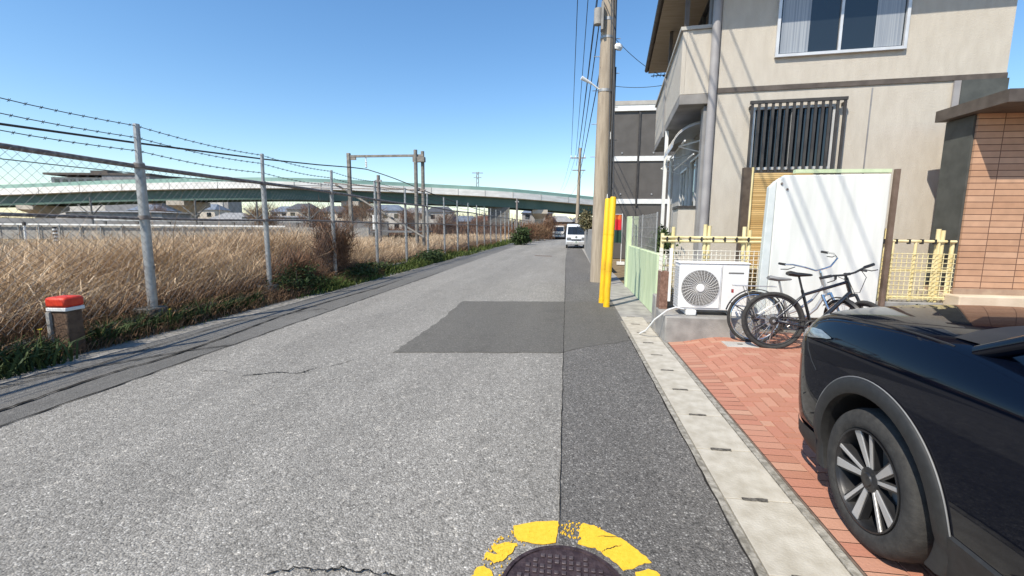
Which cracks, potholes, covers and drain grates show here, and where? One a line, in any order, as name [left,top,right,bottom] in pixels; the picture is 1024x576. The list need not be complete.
crack [263,565,396,576]
crack [0,279,402,411]
manhole cover [502,545,620,576]
